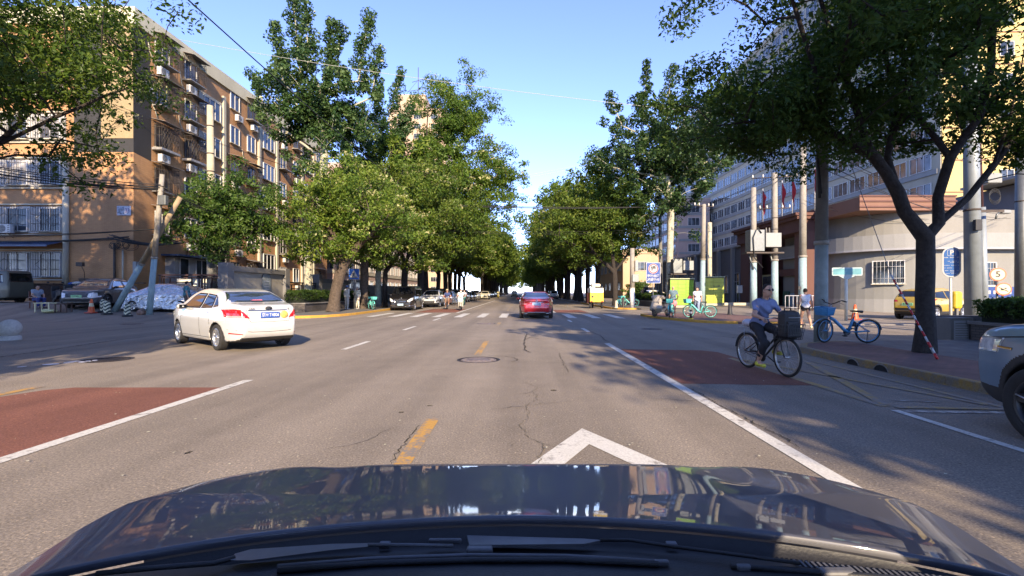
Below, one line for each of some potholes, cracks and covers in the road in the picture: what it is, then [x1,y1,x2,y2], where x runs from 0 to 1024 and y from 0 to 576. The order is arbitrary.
crack [327,425,419,462]
crack [502,382,561,462]
